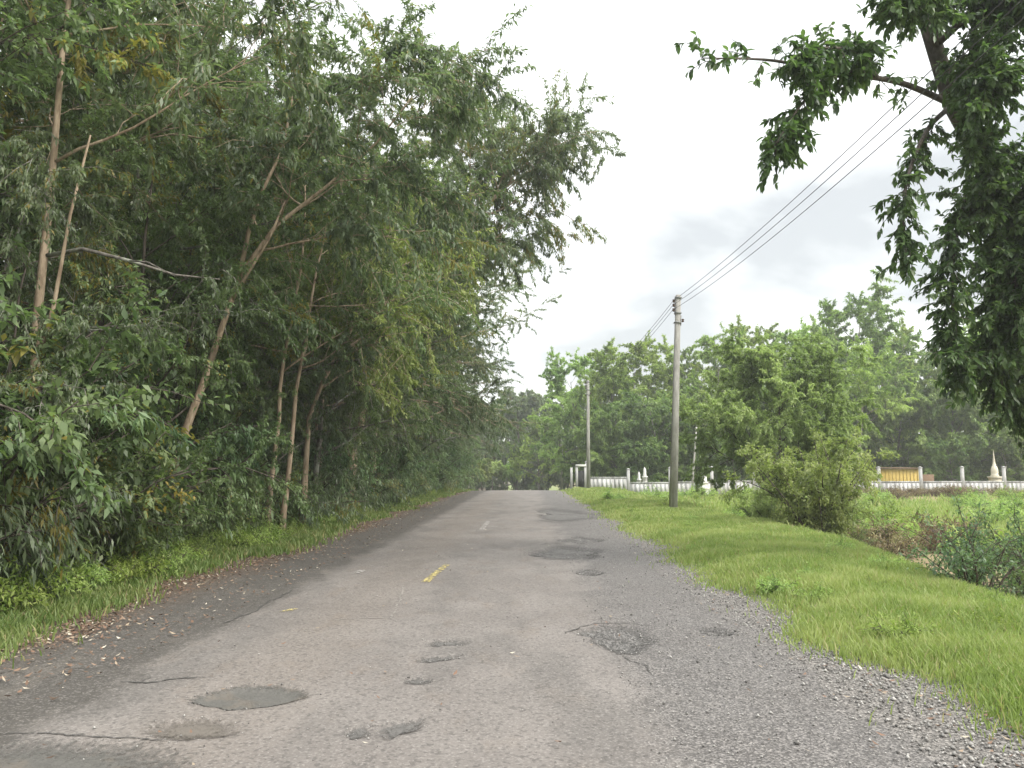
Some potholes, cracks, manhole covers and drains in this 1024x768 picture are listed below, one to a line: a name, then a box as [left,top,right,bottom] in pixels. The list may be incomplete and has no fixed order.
pothole [346,727,369,739]
crack [5,732,167,740]
pothole [375,718,426,739]
crack [222,589,294,624]
pothole [577,625,654,654]
